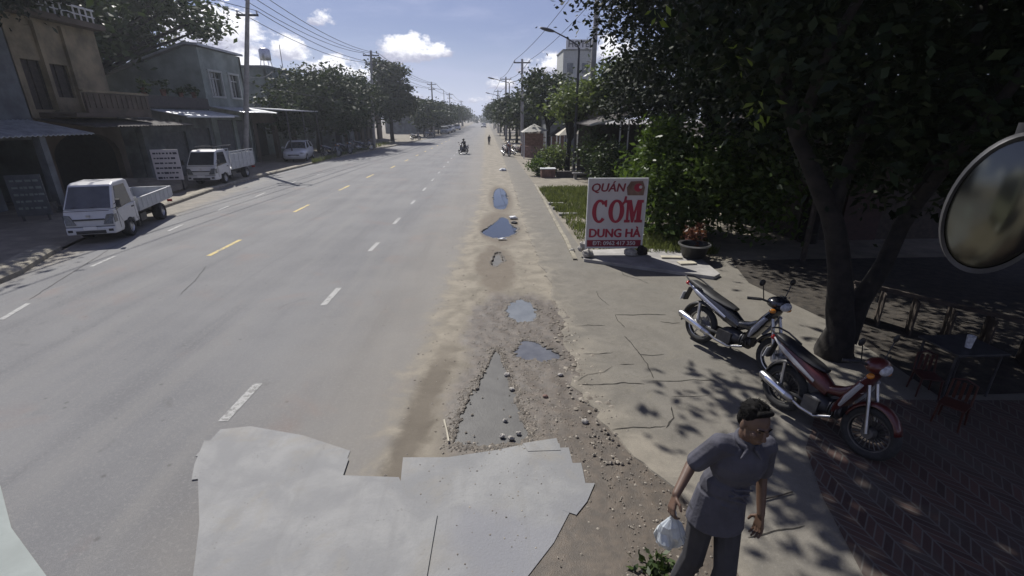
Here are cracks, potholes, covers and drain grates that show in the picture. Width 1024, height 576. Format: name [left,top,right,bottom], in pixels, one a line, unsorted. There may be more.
pothole [491,188,509,210]
pothole [489,251,507,267]
pothole [502,297,542,325]
crack [577,293,707,430]
pothole [449,348,533,451]
pothole [479,216,520,239]
pothole [509,338,569,364]
